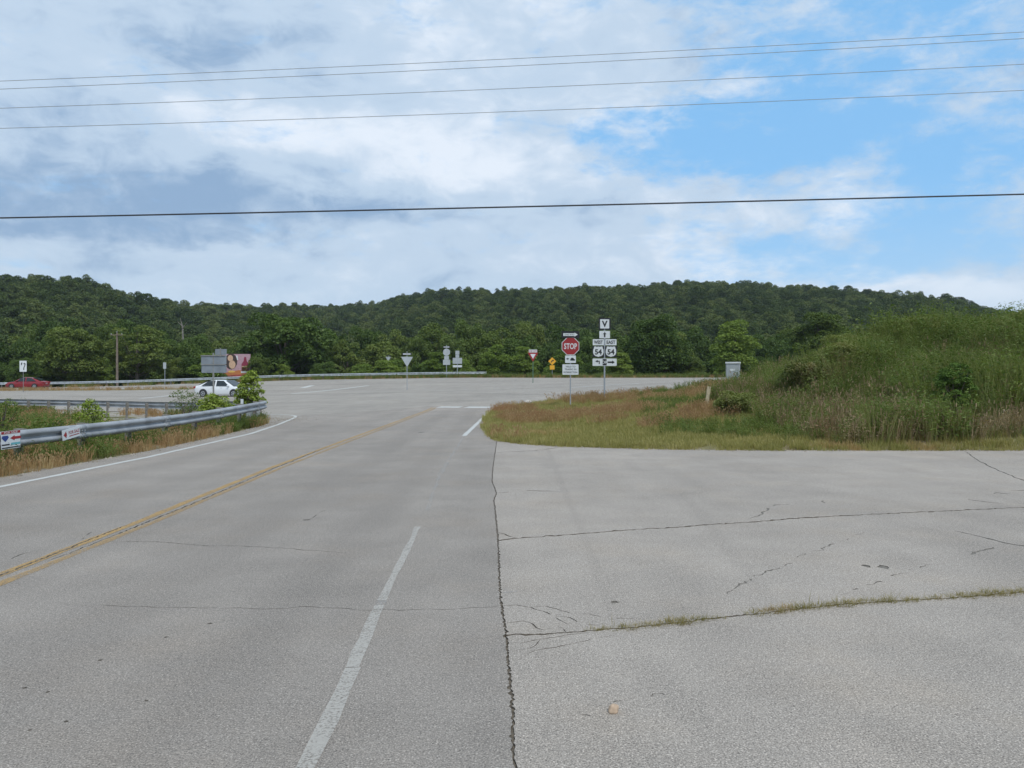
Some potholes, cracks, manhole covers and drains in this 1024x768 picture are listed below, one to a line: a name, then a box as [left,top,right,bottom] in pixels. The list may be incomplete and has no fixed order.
crack [967,452,1024,504]
crack [958,531,1023,554]
crack [727,534,861,594]
